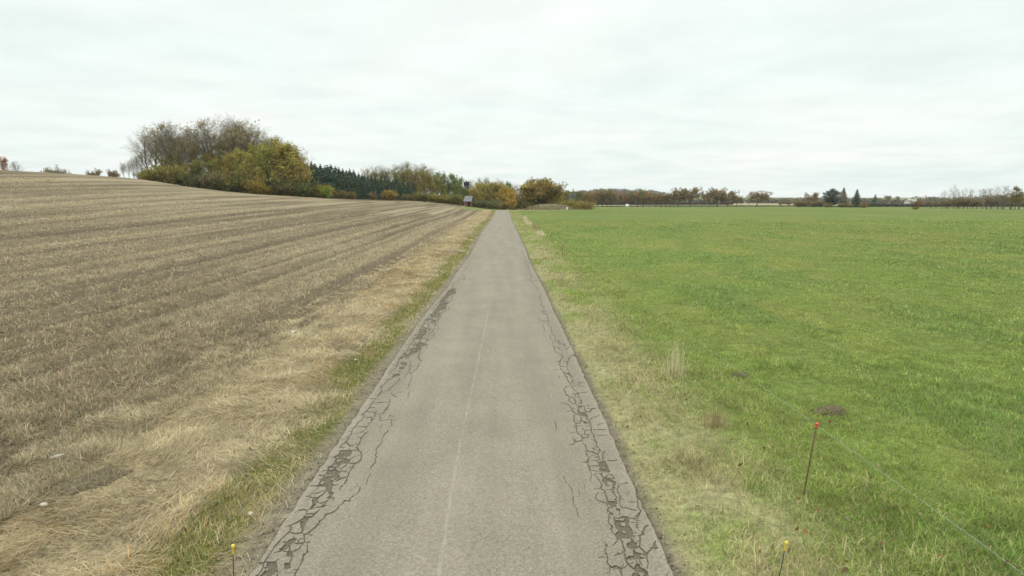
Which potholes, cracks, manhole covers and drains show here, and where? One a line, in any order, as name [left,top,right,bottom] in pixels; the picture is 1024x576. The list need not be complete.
crack [523,253,668,576]
crack [255,258,473,576]
